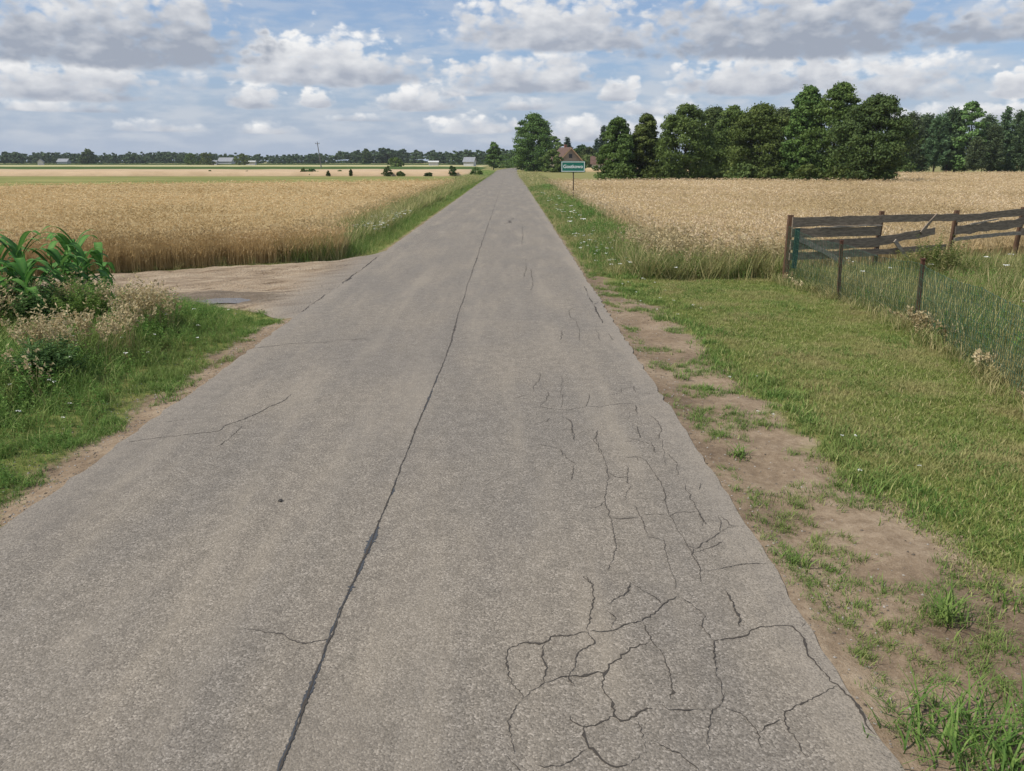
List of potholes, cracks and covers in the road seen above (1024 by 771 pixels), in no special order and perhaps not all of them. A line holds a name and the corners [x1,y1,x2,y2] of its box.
crack [516,373,764,592]
crack [505,576,888,770]
crack [151,394,291,445]
crack [245,628,335,660]
